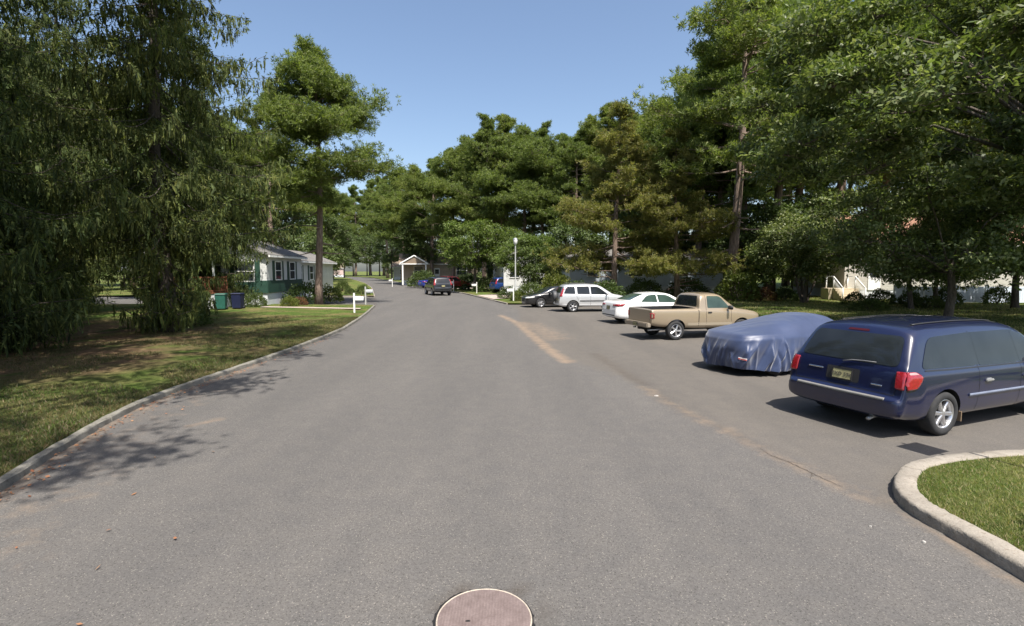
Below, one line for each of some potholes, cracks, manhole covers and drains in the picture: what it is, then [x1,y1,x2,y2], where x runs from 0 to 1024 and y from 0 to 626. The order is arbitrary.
manhole cover [432,588,535,626]
